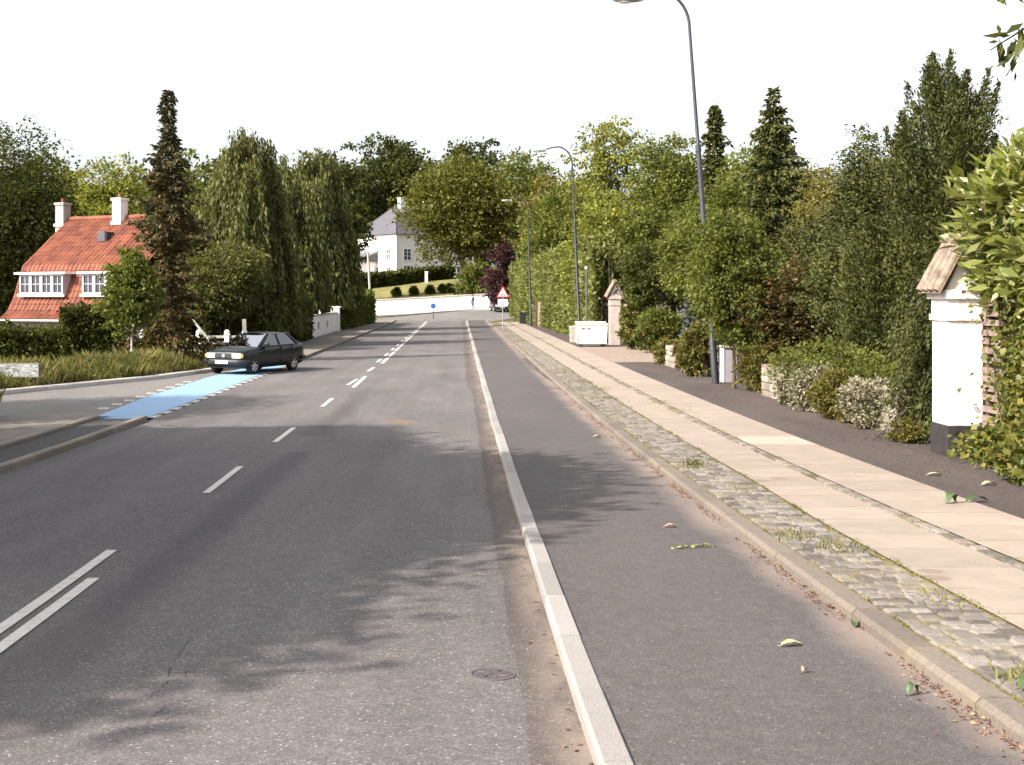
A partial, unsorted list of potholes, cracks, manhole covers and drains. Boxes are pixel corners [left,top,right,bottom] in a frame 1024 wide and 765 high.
manhole cover [469,667,516,681]
crack [147,639,190,723]
